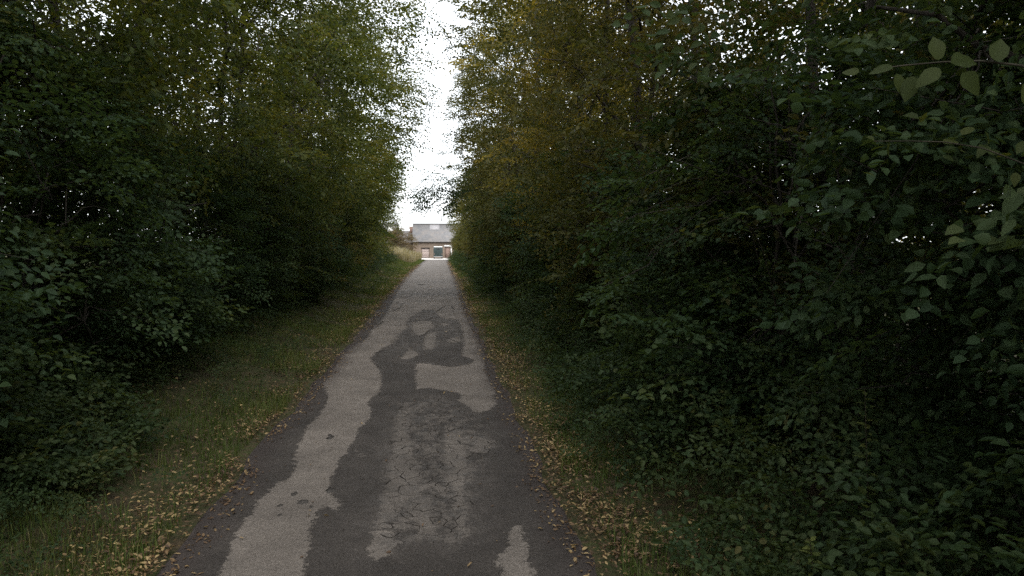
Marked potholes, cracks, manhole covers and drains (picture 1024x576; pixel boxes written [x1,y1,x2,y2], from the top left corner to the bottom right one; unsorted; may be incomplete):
crack [377,397,492,538]
